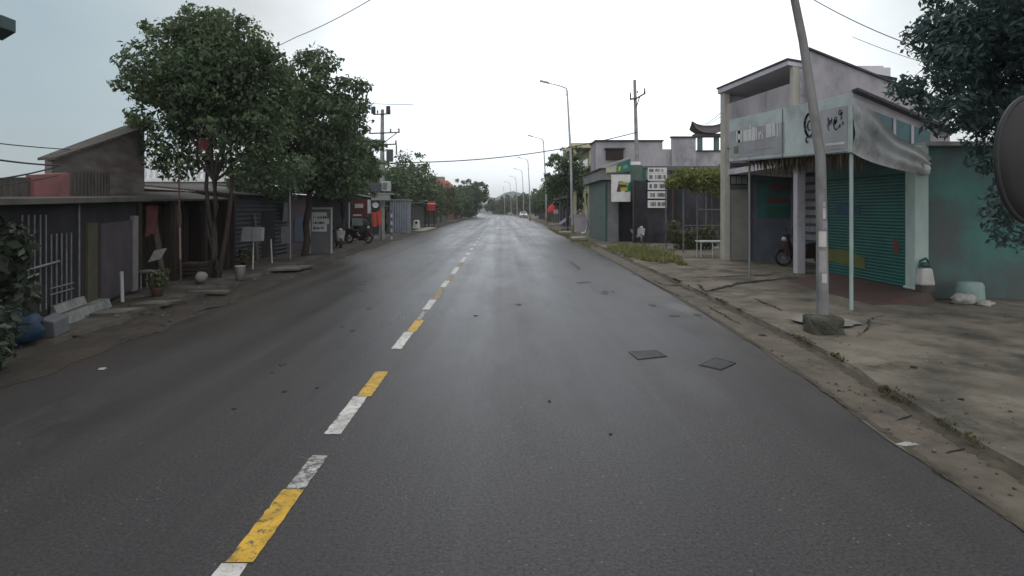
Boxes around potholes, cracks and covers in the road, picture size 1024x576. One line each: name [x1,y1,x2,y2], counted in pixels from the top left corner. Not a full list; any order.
manhole cover [629,350,667,360]
manhole cover [699,357,736,370]
